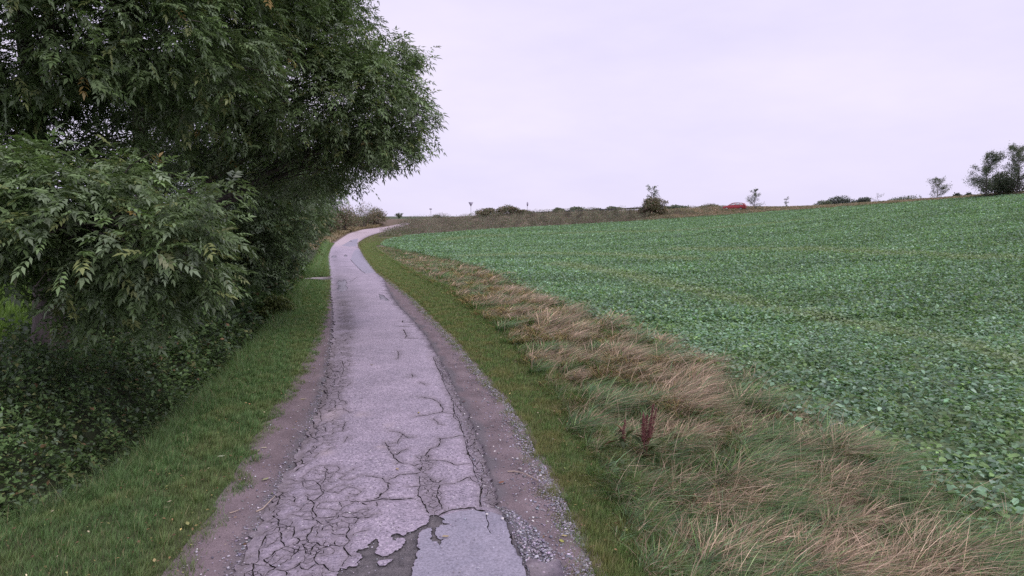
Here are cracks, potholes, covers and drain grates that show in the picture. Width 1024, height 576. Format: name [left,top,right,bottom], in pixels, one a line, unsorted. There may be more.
crack [242,301,374,576]
pothole [337,515,449,576]
crack [349,357,530,576]
